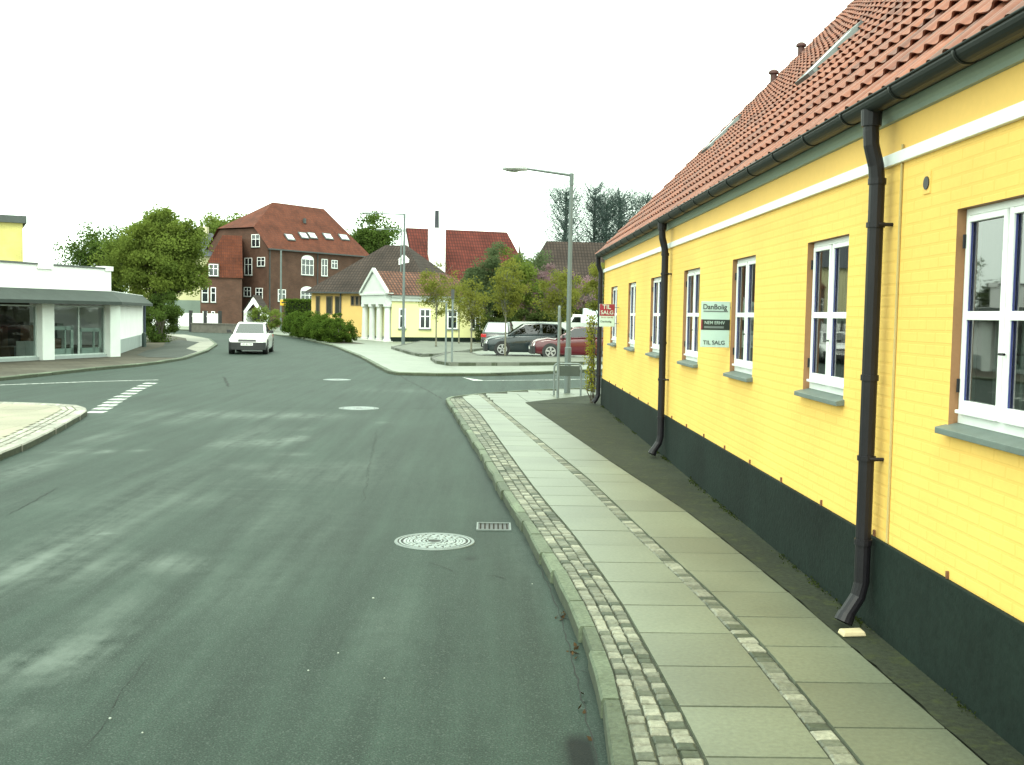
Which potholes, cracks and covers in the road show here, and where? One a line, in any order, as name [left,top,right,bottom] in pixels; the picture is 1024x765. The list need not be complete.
manhole cover [394,533,475,550]
drain grate [476,522,511,531]
